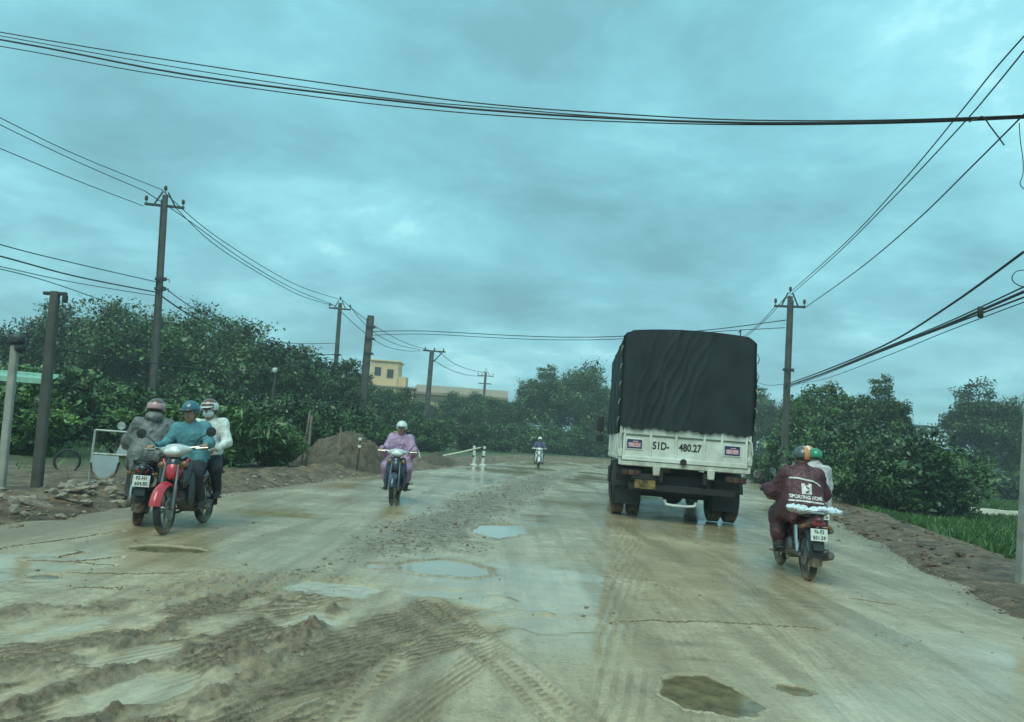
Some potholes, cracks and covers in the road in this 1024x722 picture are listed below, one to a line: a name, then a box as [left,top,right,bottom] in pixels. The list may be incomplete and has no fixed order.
pothole [467,522,537,540]
pothole [126,544,209,553]
pothole [654,672,773,720]
pothole [386,557,499,579]
crack [610,598,900,632]
crack [0,531,217,590]
pothole [773,683,816,696]
